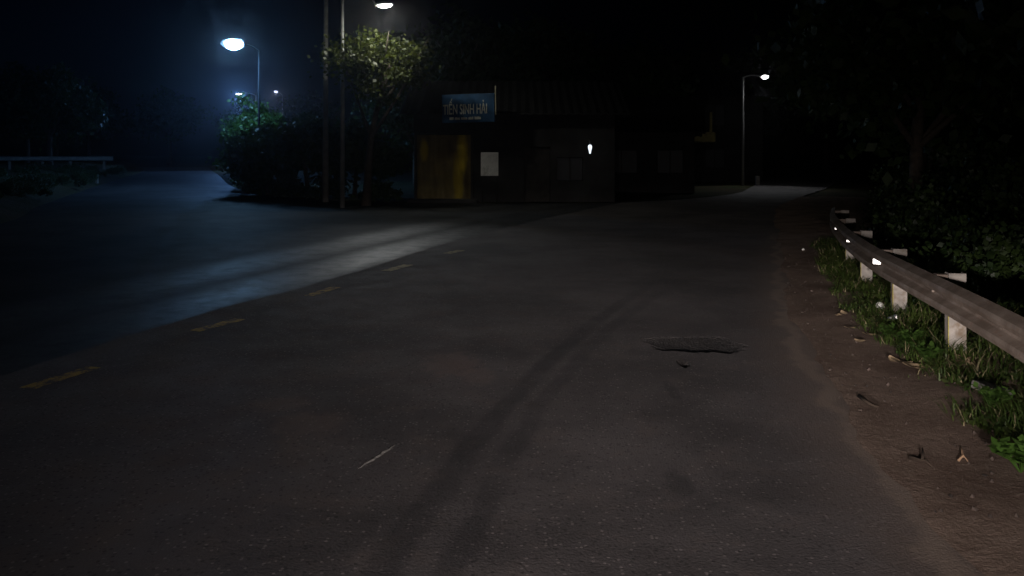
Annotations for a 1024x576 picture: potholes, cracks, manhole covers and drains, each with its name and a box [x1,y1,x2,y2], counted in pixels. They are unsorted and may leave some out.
pothole [641,336,750,354]
